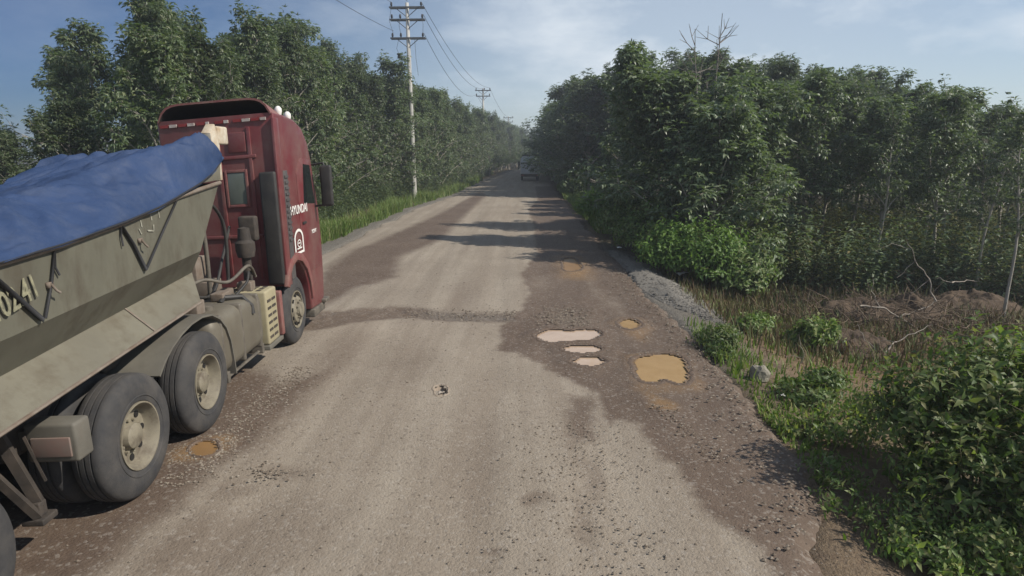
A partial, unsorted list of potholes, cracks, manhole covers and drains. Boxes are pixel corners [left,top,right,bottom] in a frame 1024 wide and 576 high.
pothole [186,437,223,458]
pothole [560,257,585,272]
pothole [530,327,607,344]
pothole [627,351,696,386]
pothole [558,342,608,355]
pothole [566,354,612,368]
pothole [614,317,646,331]
pothole [431,384,450,397]
